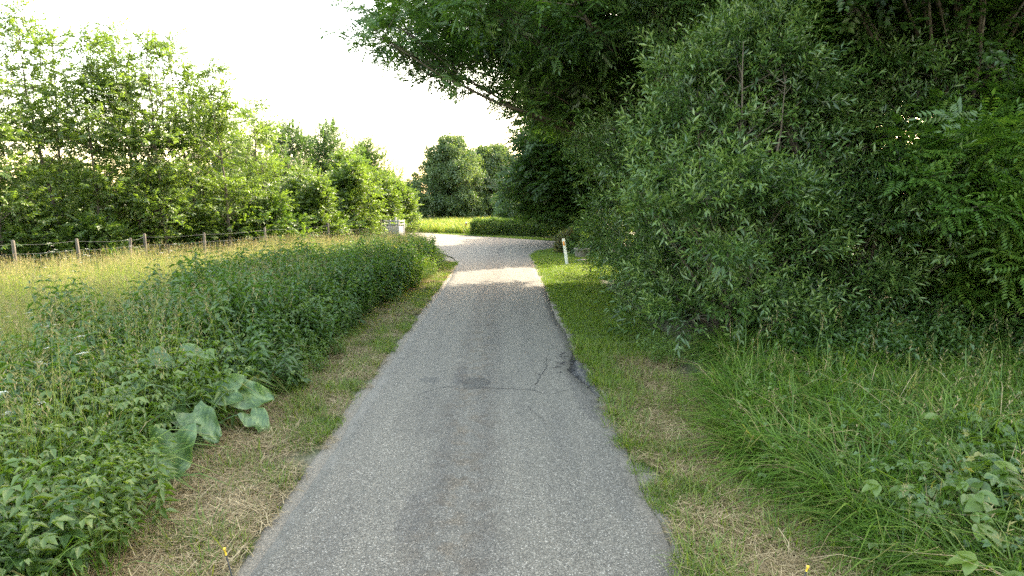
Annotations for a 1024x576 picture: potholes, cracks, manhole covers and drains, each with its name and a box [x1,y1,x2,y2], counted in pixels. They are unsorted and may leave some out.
crack [477,352,573,394]
pothole [567,353,601,397]
